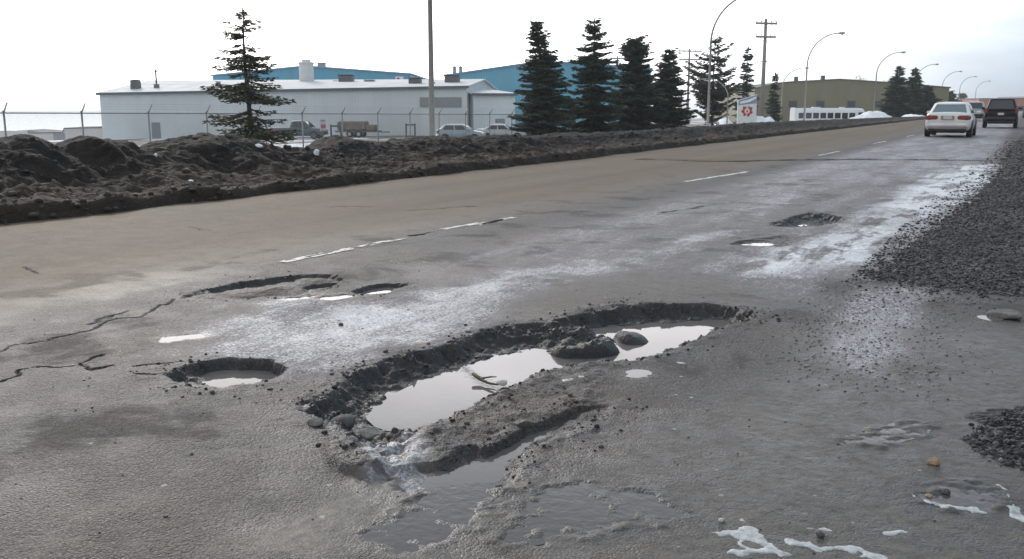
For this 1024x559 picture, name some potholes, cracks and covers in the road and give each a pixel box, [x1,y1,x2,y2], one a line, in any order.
pothole [380,405,608,494]
pothole [179,273,346,302]
pothole [157,357,288,389]
pothole [769,212,848,227]
pothole [730,234,798,247]
pothole [351,283,417,295]
crack [133,361,185,375]
pothole [297,303,757,467]
crack [0,299,175,383]
